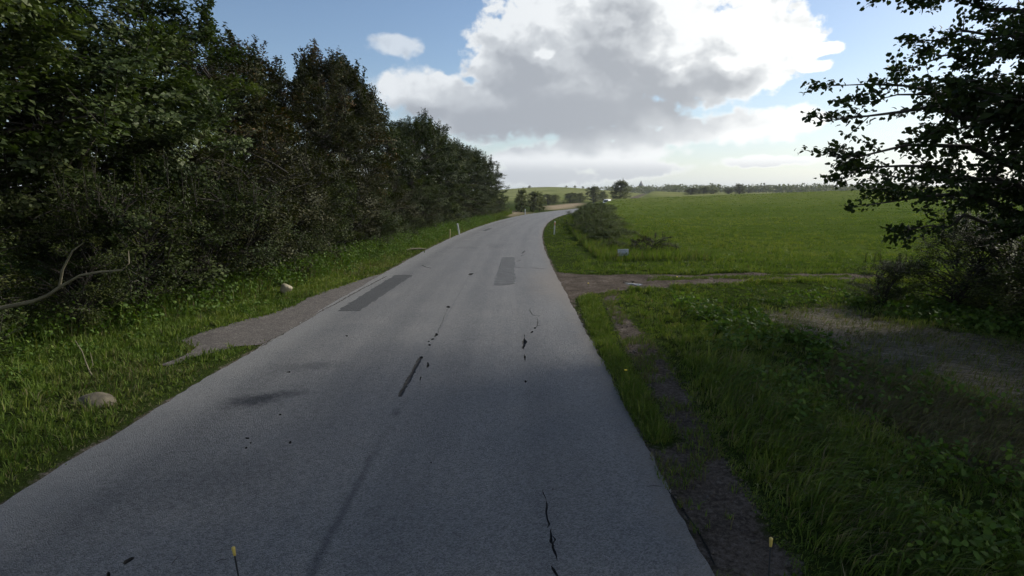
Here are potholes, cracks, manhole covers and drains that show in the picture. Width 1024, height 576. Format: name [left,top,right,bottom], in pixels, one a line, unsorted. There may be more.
crack [542,489,558,576]
